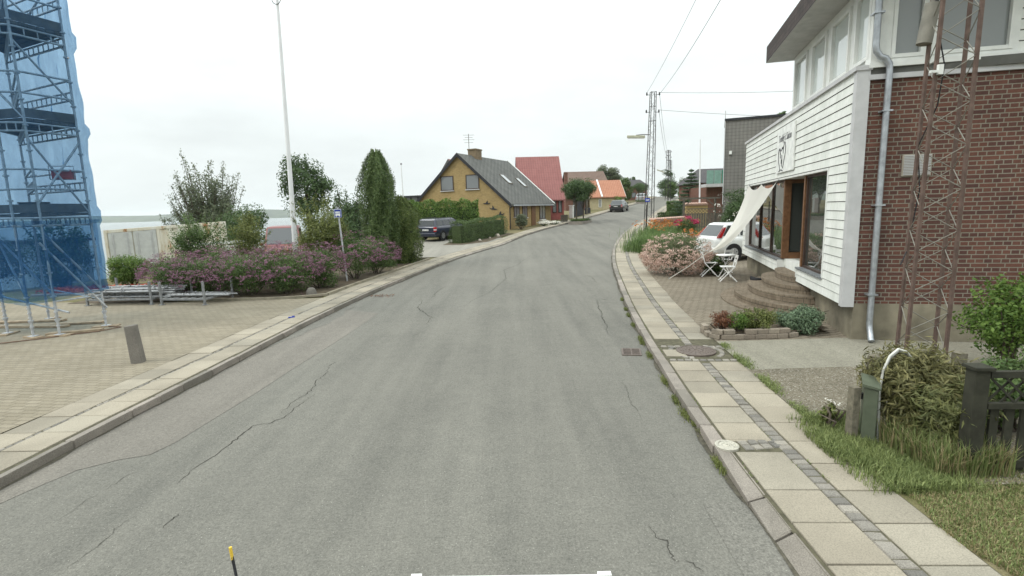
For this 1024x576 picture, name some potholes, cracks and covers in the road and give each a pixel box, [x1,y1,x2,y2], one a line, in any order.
drain grate [621,348,642,356]
utility cover [715,440,739,452]
crack [182,365,330,479]
manhole cover [676,345,716,357]
